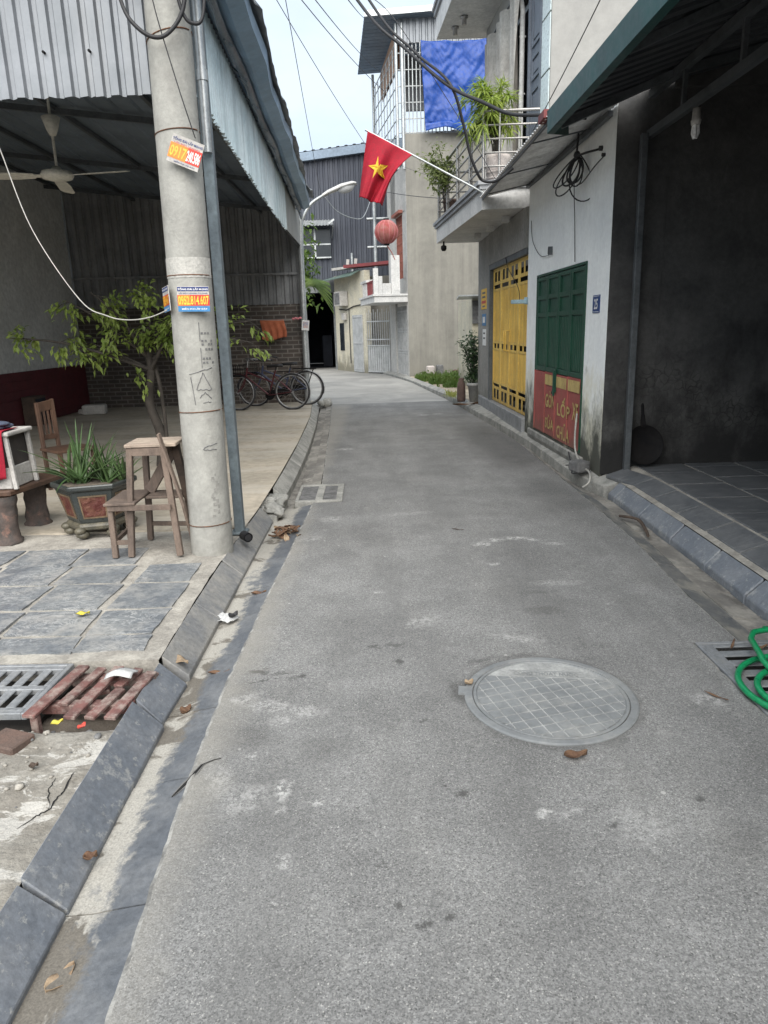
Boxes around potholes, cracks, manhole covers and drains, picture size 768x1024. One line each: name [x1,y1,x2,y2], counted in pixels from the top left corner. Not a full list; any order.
drain grate [0,663,75,732]
crack [17,773,73,829]
crack [172,758,221,797]
drain grate [695,640,768,717]
manhole cover [458,657,640,746]
